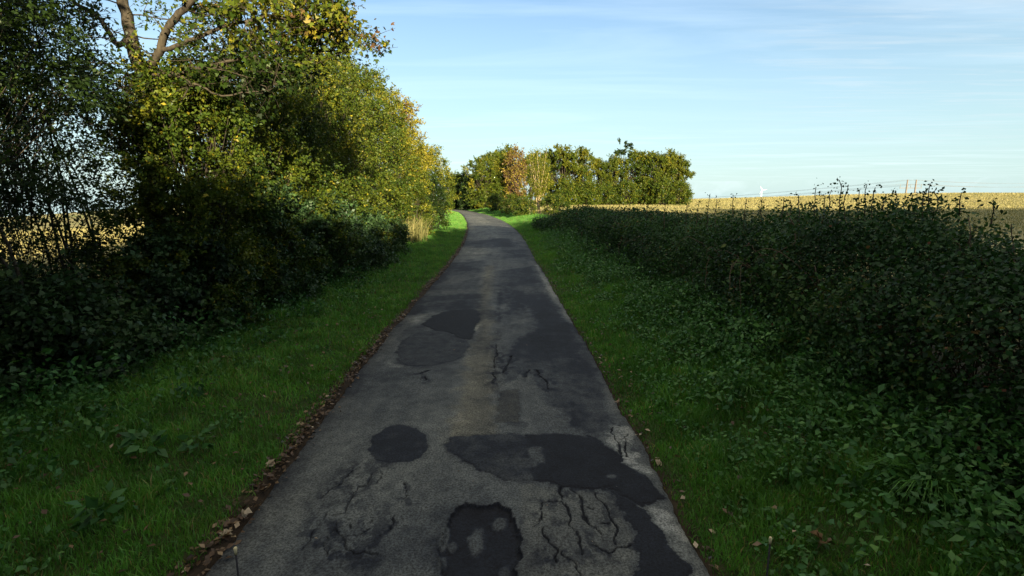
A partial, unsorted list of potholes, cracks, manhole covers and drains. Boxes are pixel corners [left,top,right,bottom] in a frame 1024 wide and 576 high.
crack [492,353,548,387]
crack [303,469,405,556]
crack [538,488,631,574]
